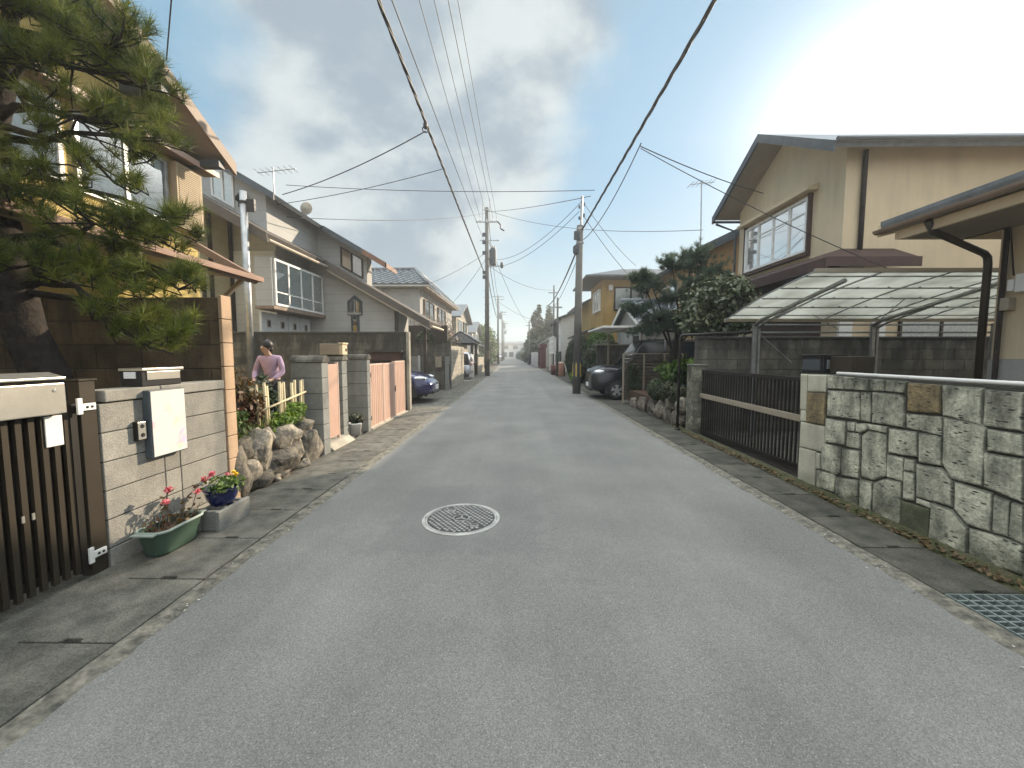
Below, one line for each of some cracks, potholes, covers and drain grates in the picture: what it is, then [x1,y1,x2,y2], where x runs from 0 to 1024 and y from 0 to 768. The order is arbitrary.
drain grate [945,594,1024,640]
manhole cover [422,504,500,536]
